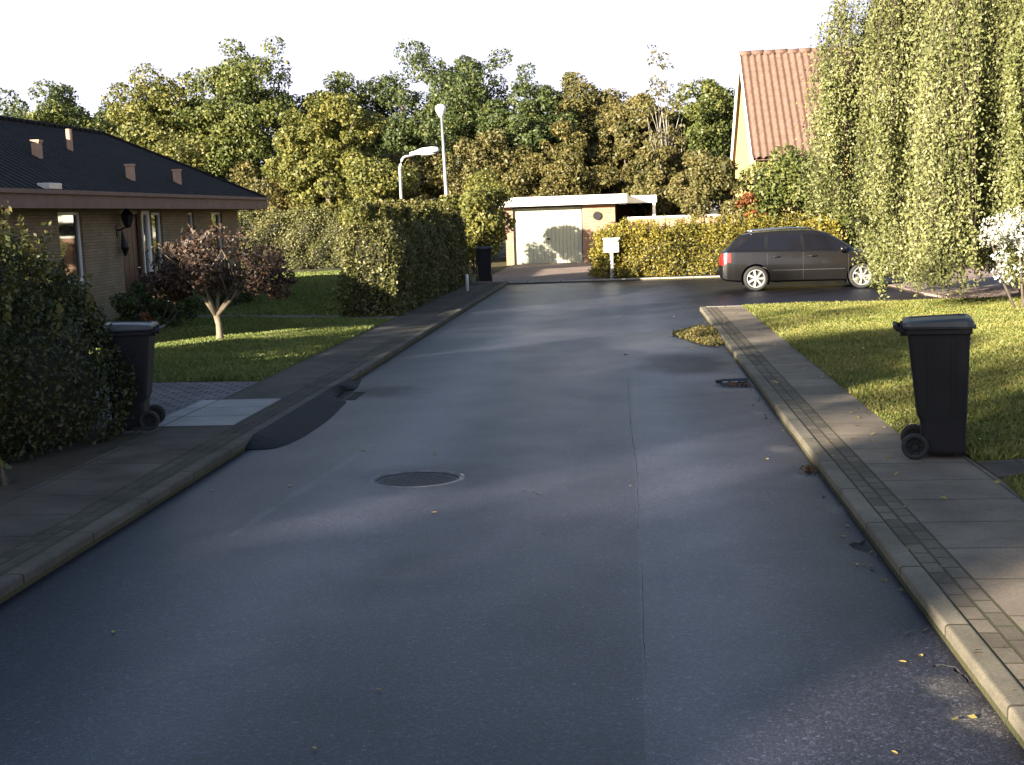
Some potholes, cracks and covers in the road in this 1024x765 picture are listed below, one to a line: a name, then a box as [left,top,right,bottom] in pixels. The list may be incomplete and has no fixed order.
pothole [849,539,876,553]
drain grate [715,378,754,388]
manhole cover [370,470,465,487]
crack [933,664,976,690]
